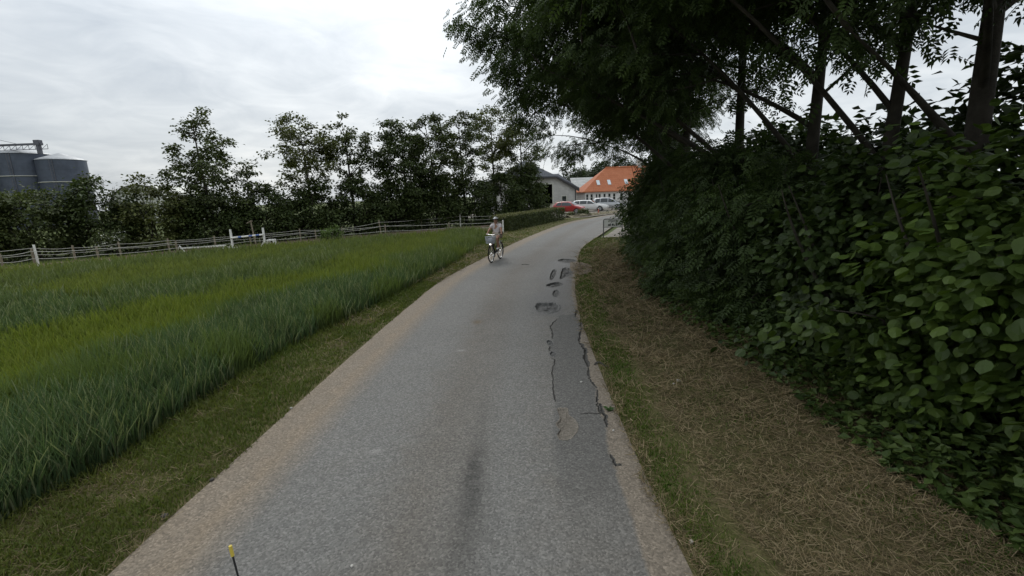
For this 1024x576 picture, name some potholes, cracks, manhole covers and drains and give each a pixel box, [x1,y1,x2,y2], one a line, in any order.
crack [610,454,622,466]
pothole [533,302,561,314]
crack [574,310,608,427]
